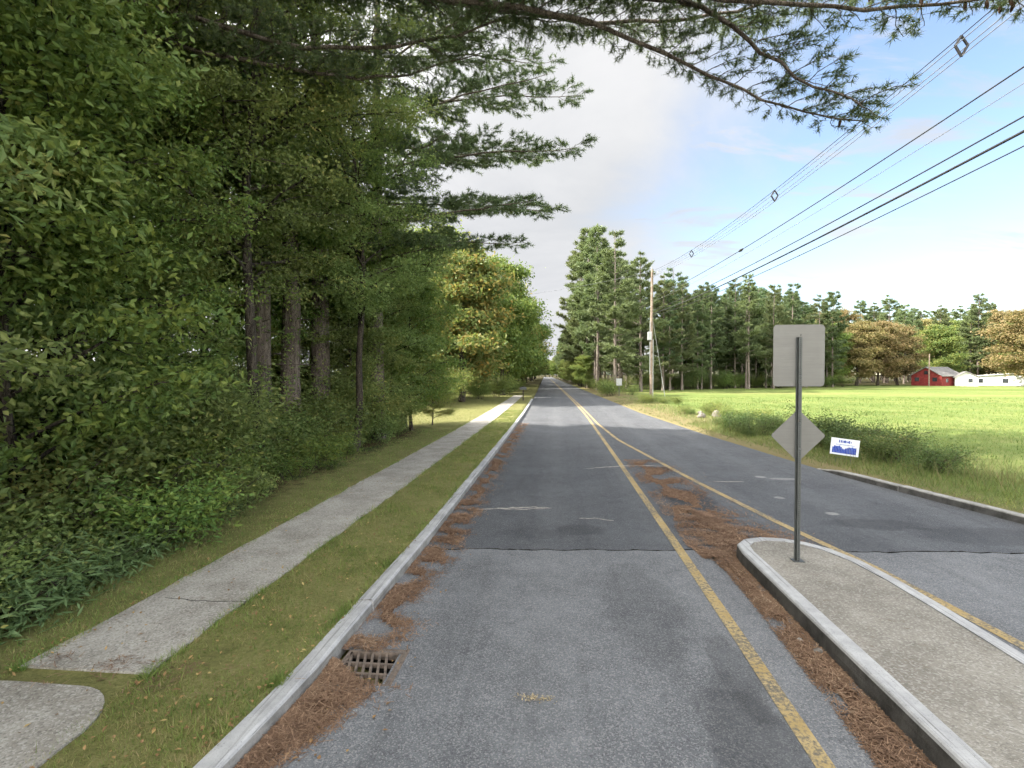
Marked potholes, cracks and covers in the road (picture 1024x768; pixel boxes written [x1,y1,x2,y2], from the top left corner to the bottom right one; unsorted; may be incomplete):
drain grate [329,647,410,686]
